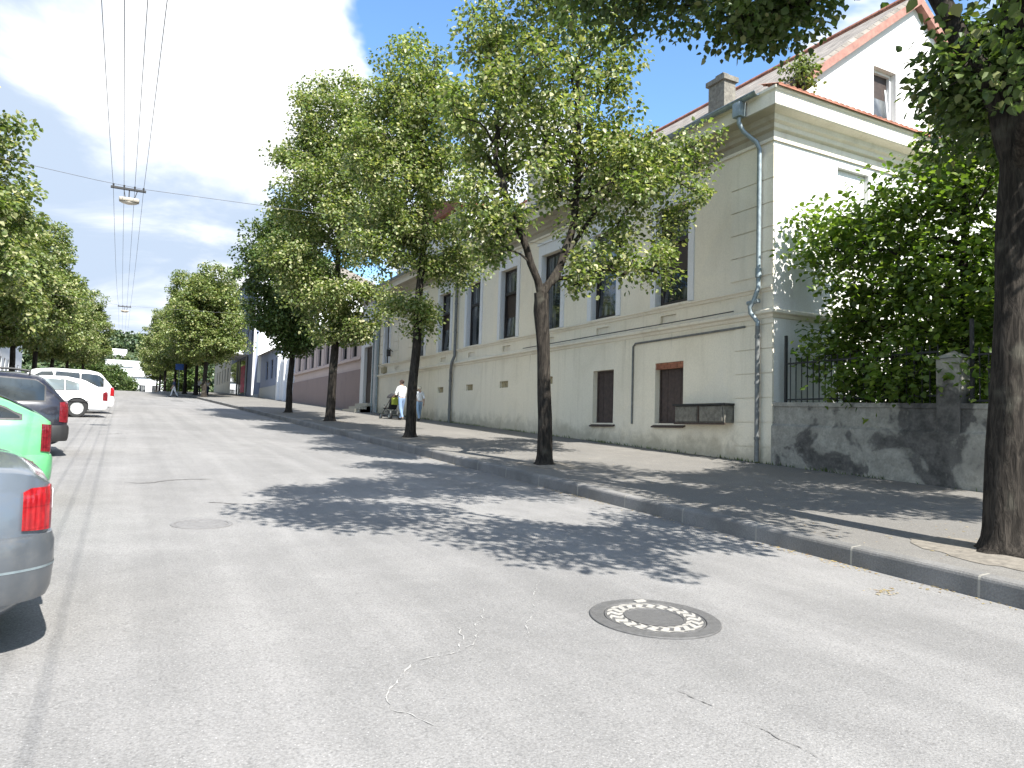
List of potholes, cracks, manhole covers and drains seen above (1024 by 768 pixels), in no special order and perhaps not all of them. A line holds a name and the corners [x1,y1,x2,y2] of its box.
manhole cover [170,518,233,529]
crack [385,609,485,728]
manhole cover [589,599,722,640]
